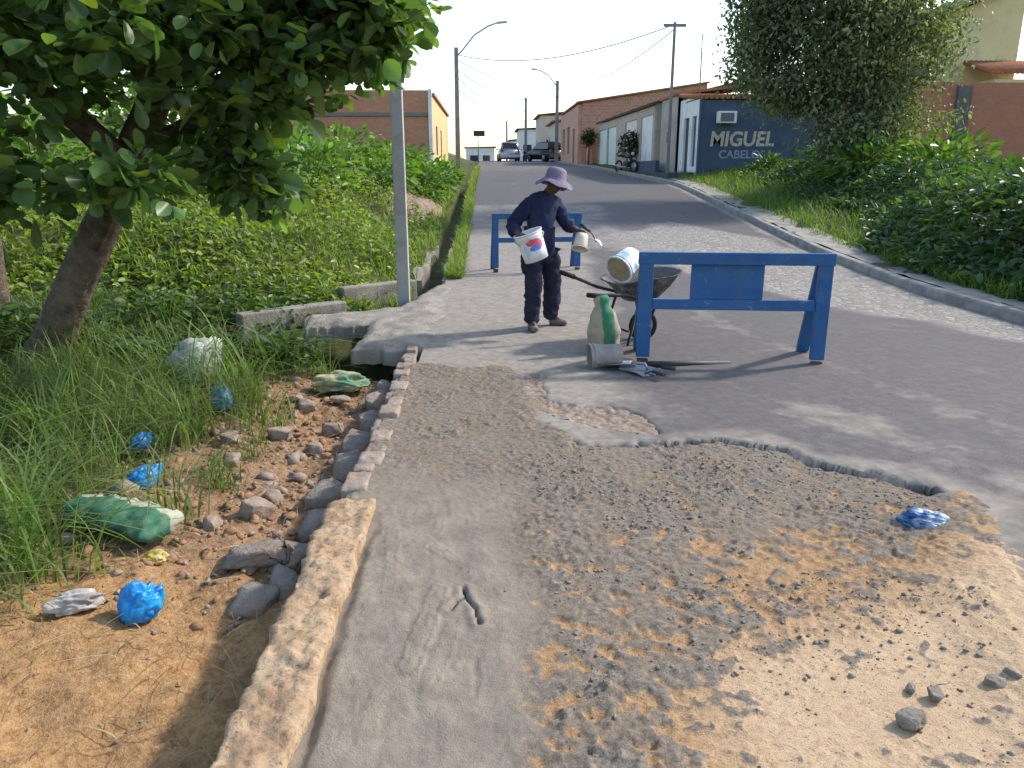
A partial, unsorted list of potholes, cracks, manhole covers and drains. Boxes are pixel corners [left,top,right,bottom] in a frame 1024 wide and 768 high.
pothole [289,361,1024,768]
